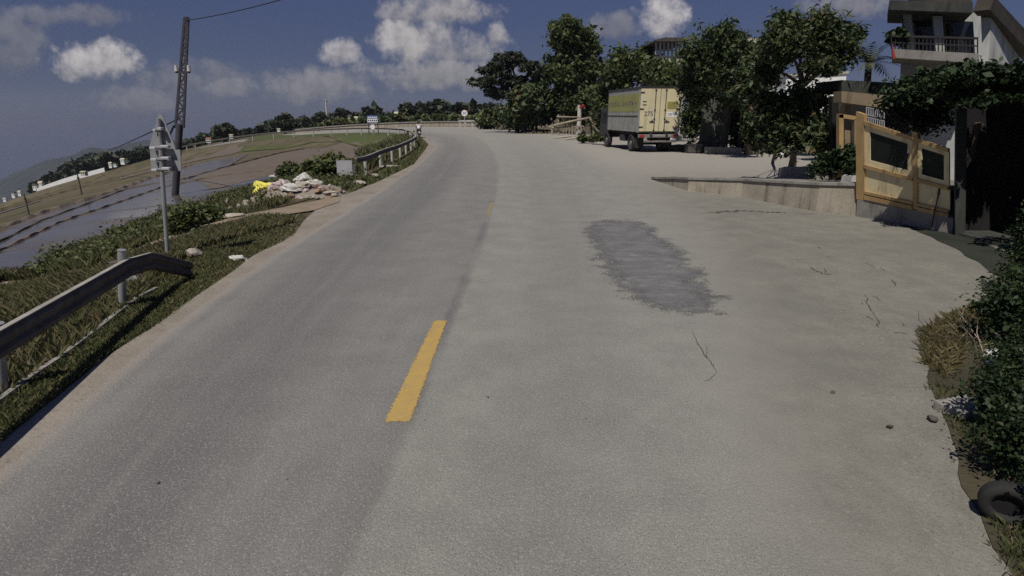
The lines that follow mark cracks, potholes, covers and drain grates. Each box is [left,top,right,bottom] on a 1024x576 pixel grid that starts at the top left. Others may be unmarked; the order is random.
crack [812,247,907,334]
